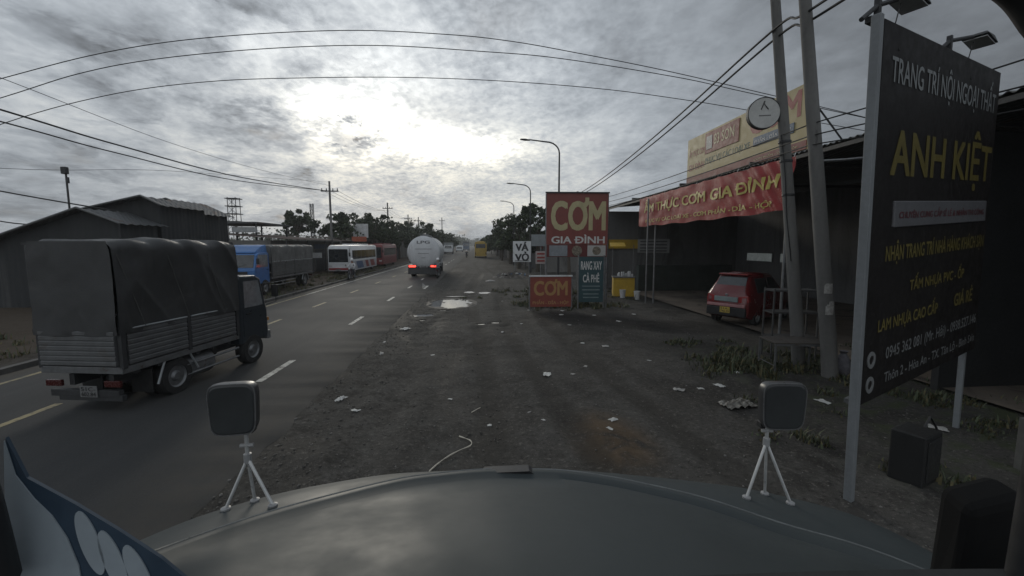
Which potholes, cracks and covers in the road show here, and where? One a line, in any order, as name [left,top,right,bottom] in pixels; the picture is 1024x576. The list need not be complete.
pothole [426,298,477,309]
